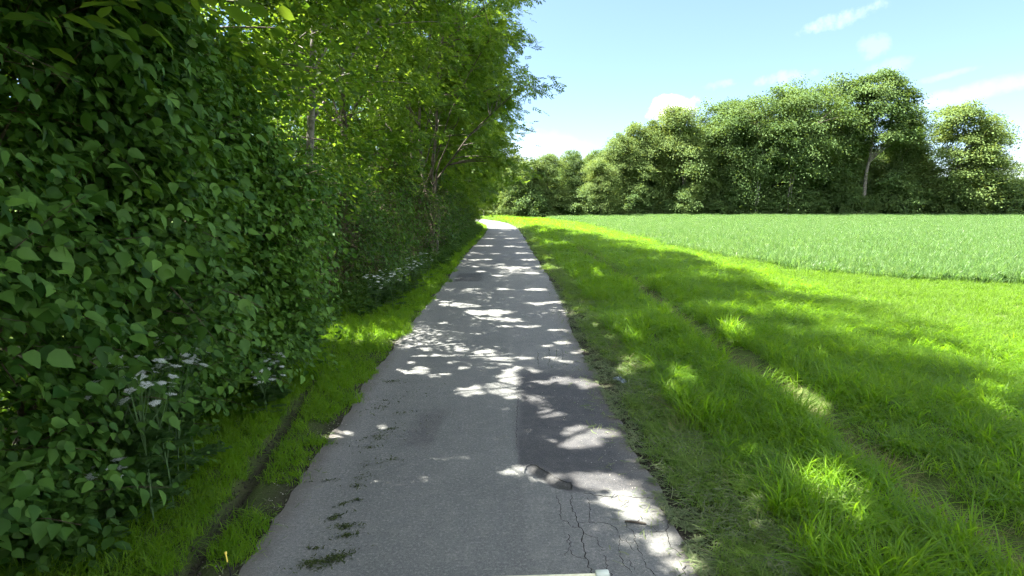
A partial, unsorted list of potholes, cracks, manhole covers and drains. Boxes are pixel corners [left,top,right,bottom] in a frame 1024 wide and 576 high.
crack [557,493,686,576]
pothole [524,464,573,490]
